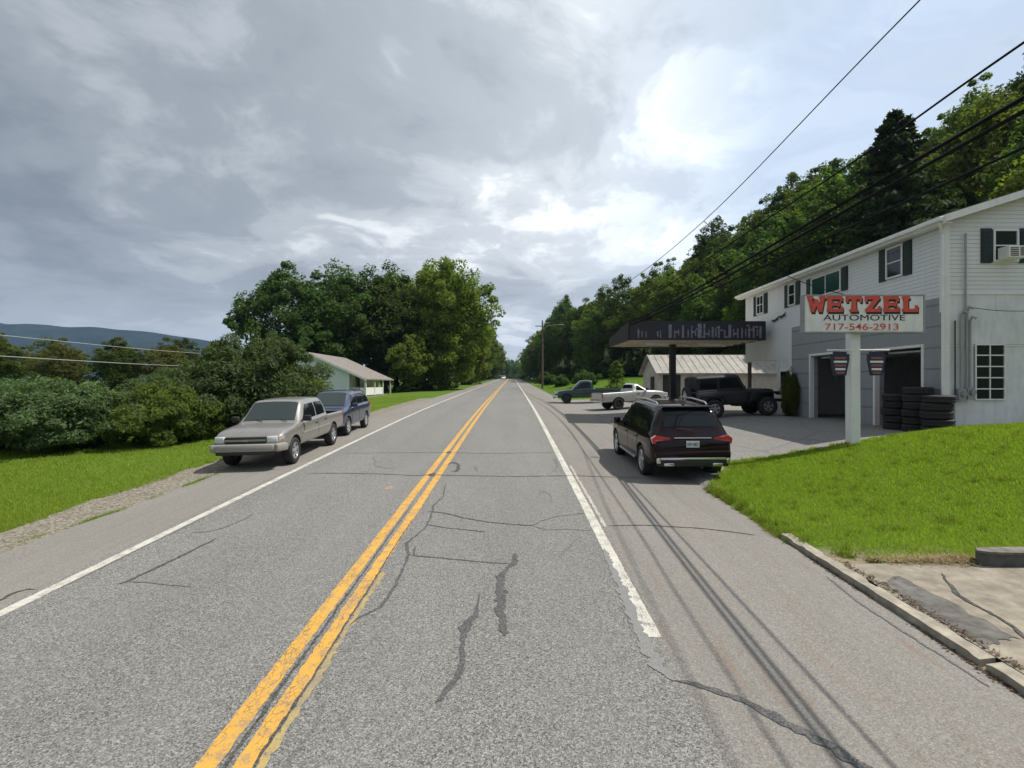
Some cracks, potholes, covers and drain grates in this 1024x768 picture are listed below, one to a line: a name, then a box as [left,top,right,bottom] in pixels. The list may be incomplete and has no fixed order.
crack [828,573,1024,687]
crack [63,452,637,768]
